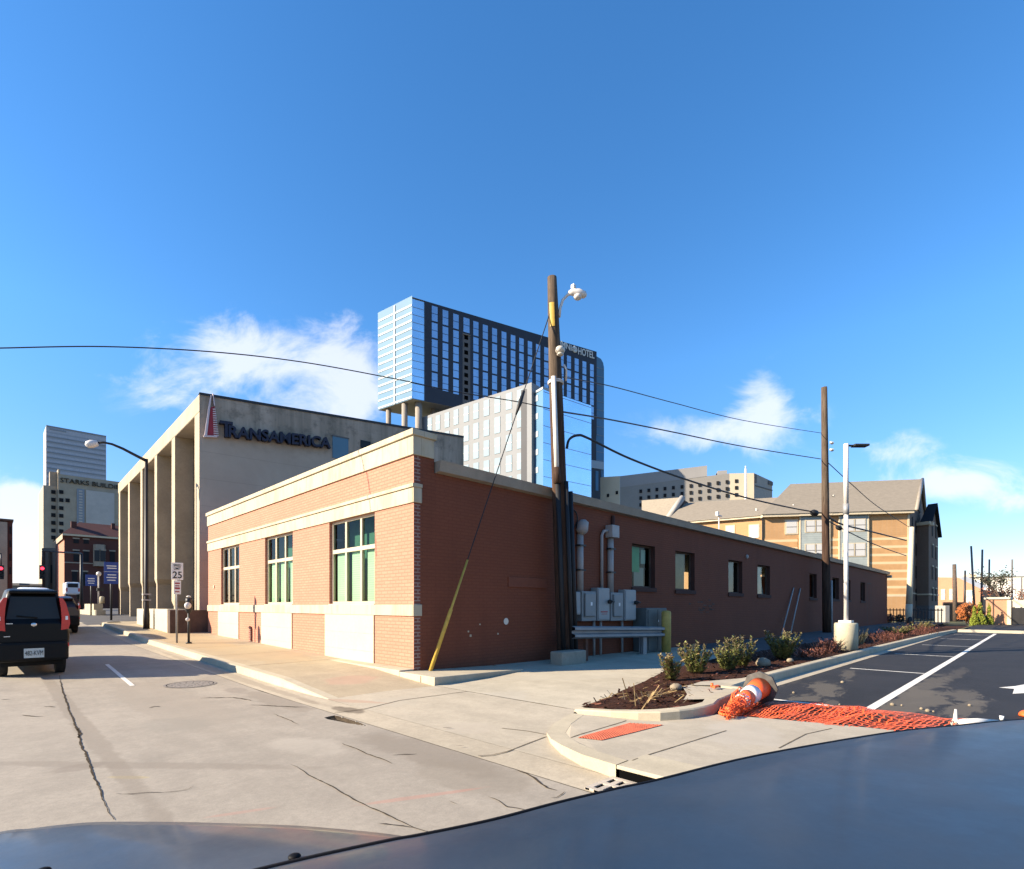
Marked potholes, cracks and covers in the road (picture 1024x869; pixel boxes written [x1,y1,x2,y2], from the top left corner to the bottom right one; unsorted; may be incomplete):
crack [208,697,297,724]
crack [488,770,565,810]
manhole cover [163,680,217,688]
crack [25,675,193,819]
crack [293,765,425,831]
